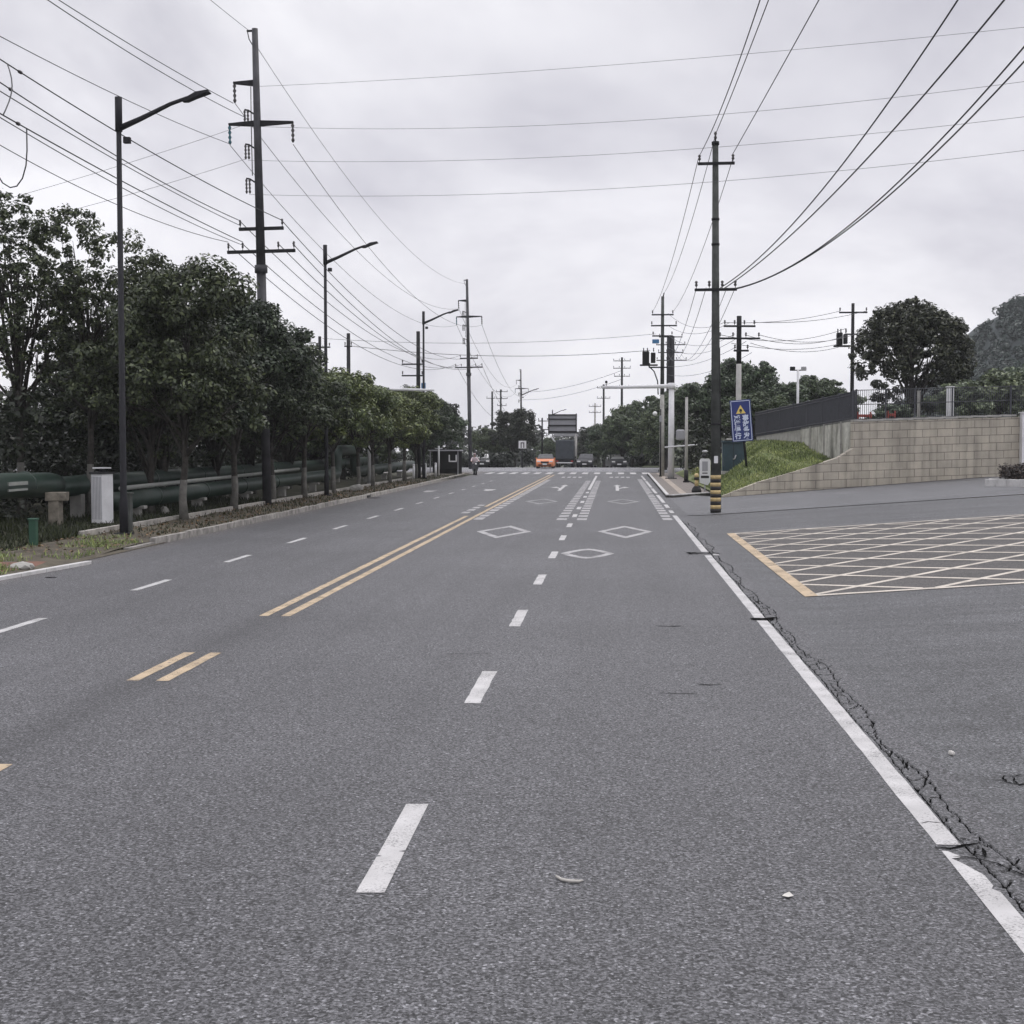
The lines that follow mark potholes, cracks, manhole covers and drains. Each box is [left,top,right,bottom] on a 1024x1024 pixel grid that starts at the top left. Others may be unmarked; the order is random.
crack [682,521,1024,912]
